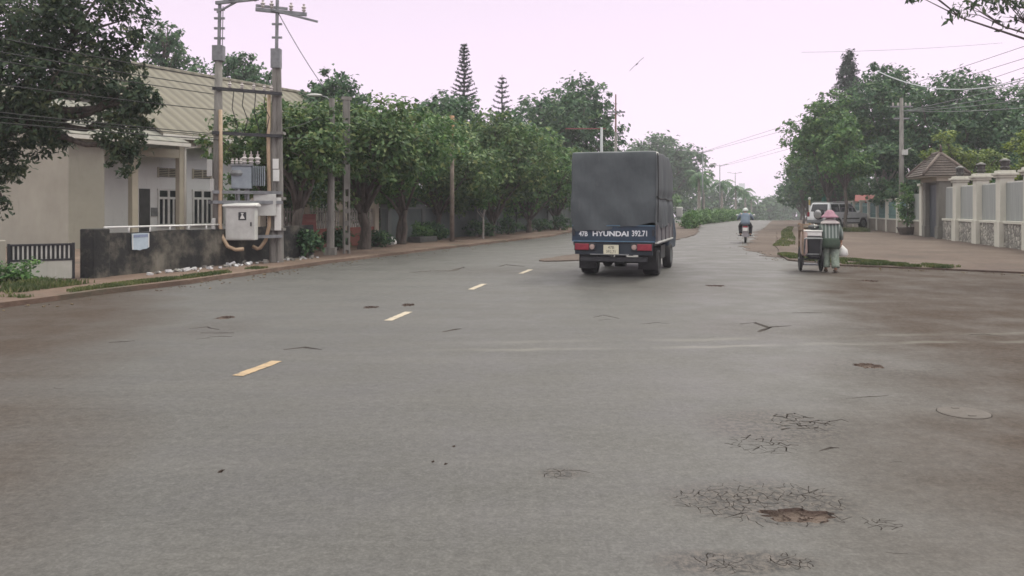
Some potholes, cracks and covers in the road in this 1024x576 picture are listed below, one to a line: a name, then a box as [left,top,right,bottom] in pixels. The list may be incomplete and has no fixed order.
crack [743,322,783,332]
crack [725,413,848,454]
crack [694,553,814,574]
pothole [757,507,836,523]
manhole cover [936,406,993,419]
